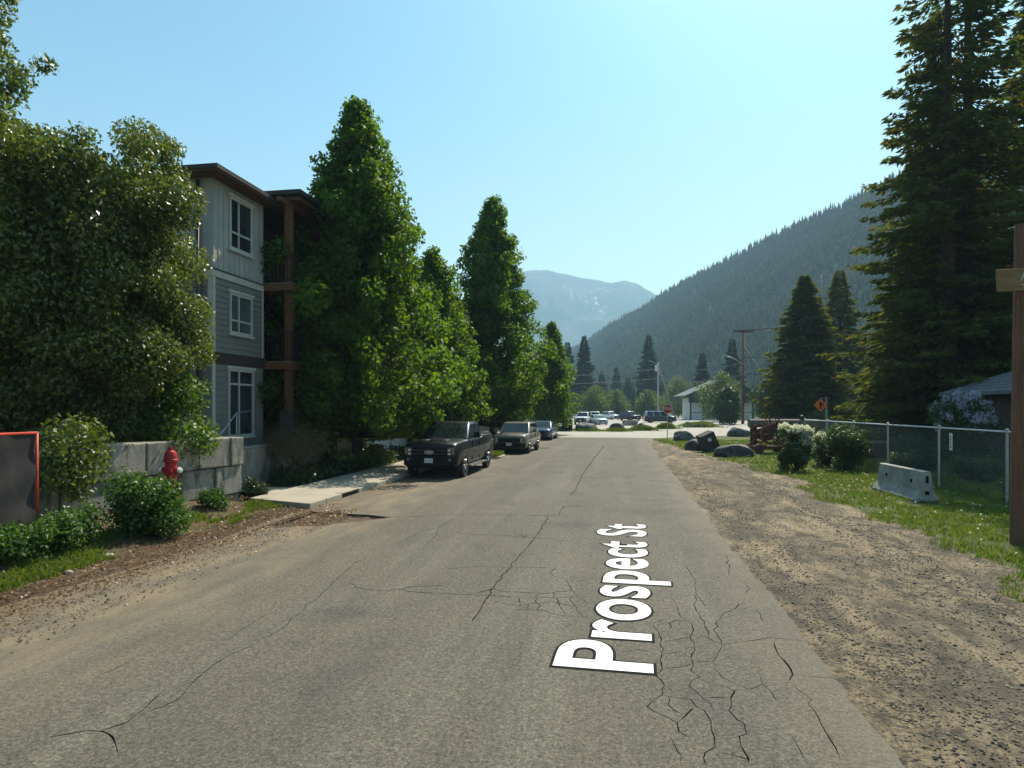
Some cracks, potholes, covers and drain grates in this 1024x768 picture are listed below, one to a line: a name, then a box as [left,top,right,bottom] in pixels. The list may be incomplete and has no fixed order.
crack [631,555,842,765]
crack [52,691,185,752]
crack [352,446,654,622]
